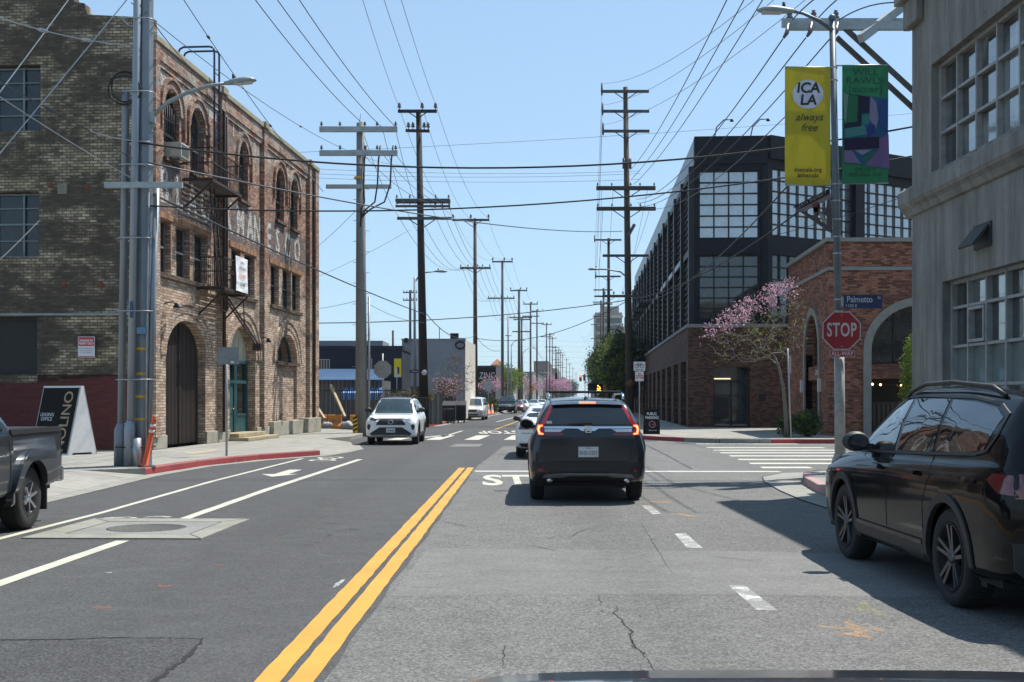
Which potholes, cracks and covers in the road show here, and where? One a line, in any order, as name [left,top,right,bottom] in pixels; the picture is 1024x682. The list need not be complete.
crack [598,595,660,670]
manhole cover [21,518,250,540]
